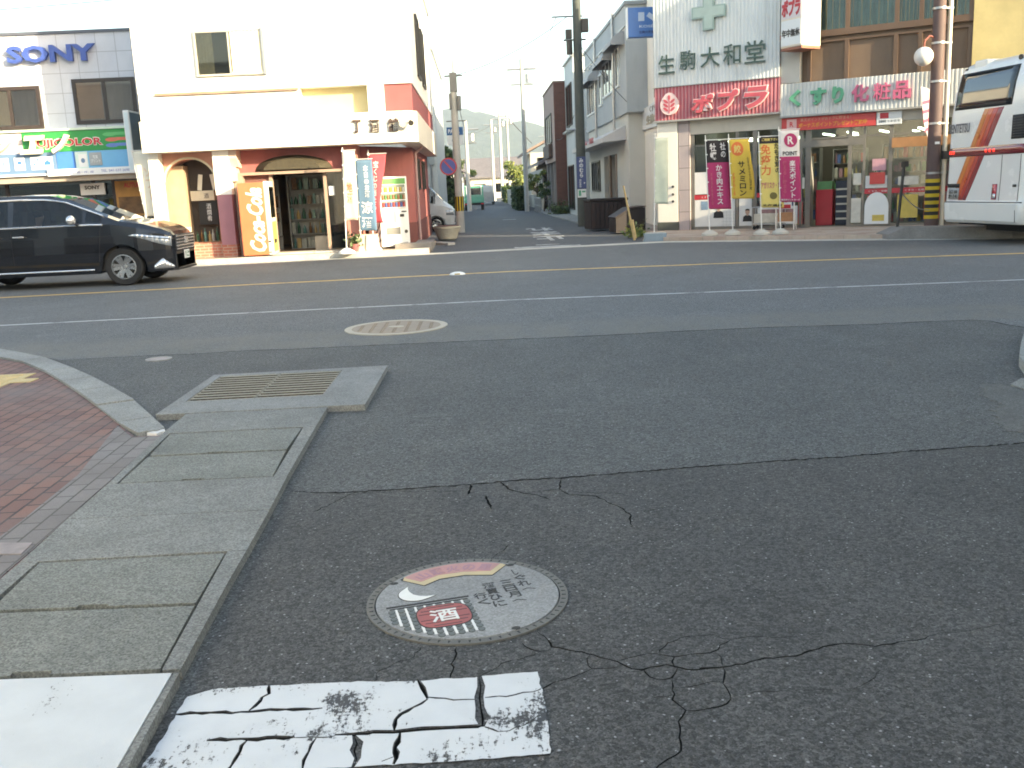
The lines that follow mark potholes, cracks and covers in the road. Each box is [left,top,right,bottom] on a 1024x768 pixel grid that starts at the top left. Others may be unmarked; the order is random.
manhole cover [366,559,568,646]
drain grate [256,371,341,398]
drain grate [187,374,280,402]
manhole cover [345,319,448,336]
crack [292,442,1024,527]
crack [482,622,1016,768]
